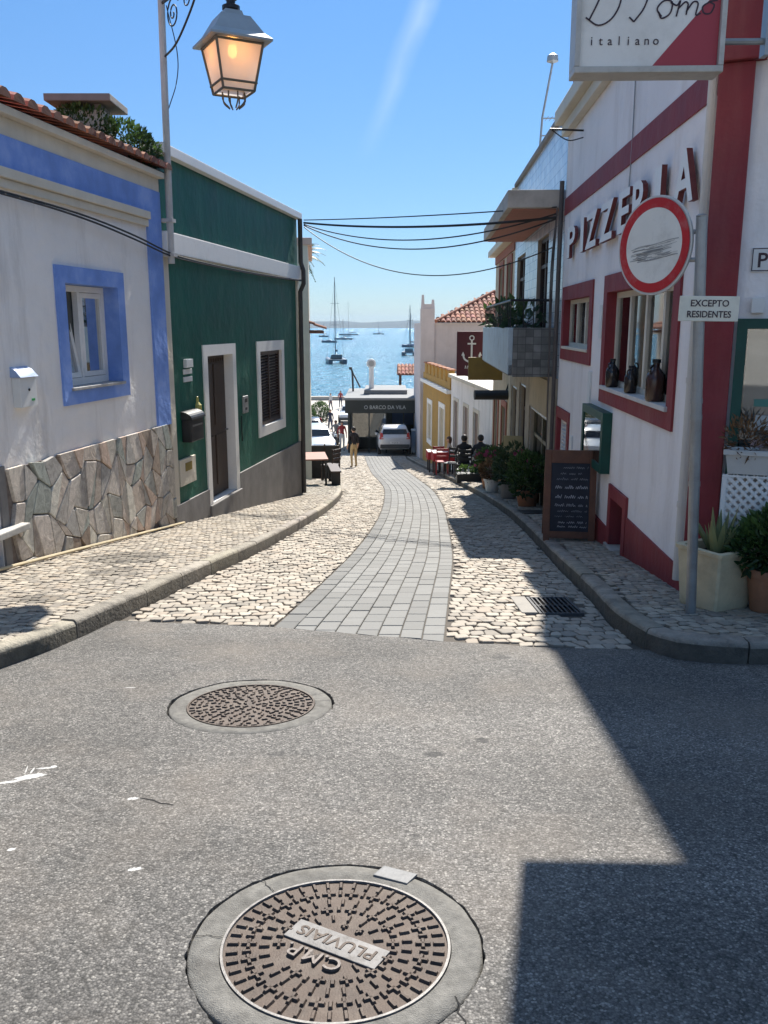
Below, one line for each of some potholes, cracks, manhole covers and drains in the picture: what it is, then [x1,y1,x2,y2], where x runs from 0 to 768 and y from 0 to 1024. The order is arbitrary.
manhole cover [186,866,483,1024]
drain grate [510,596,584,617]
manhole cover [168,680,333,734]
